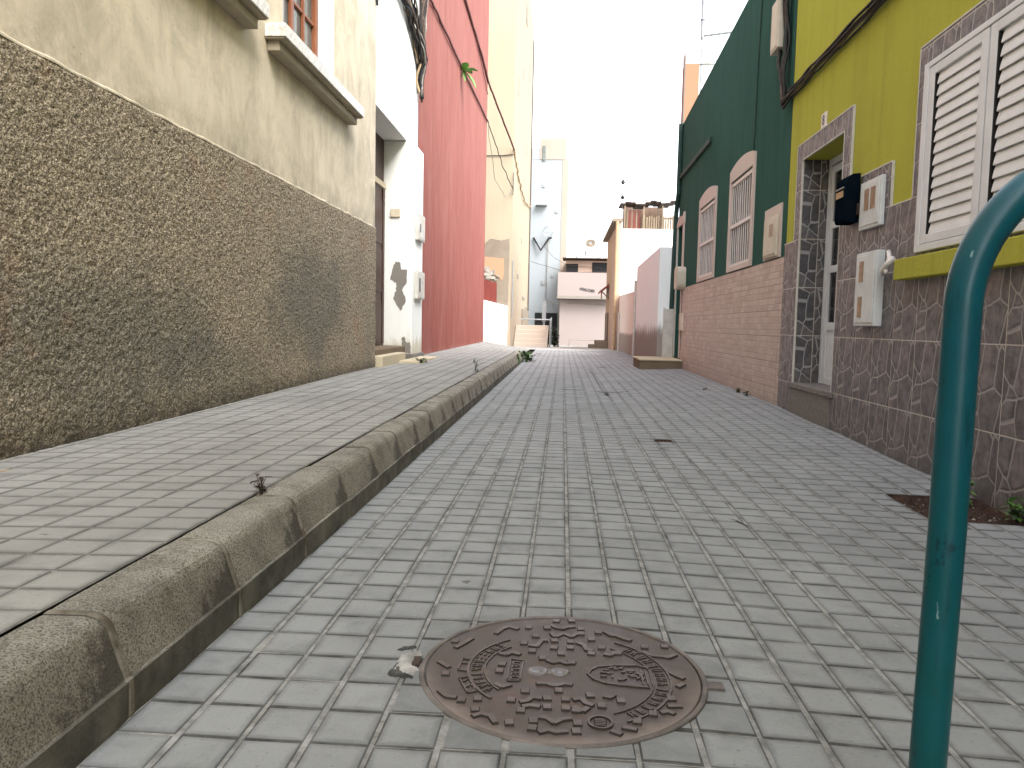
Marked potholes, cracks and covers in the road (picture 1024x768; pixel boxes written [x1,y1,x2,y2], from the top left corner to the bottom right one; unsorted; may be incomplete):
manhole cover [388,616,725,749]
